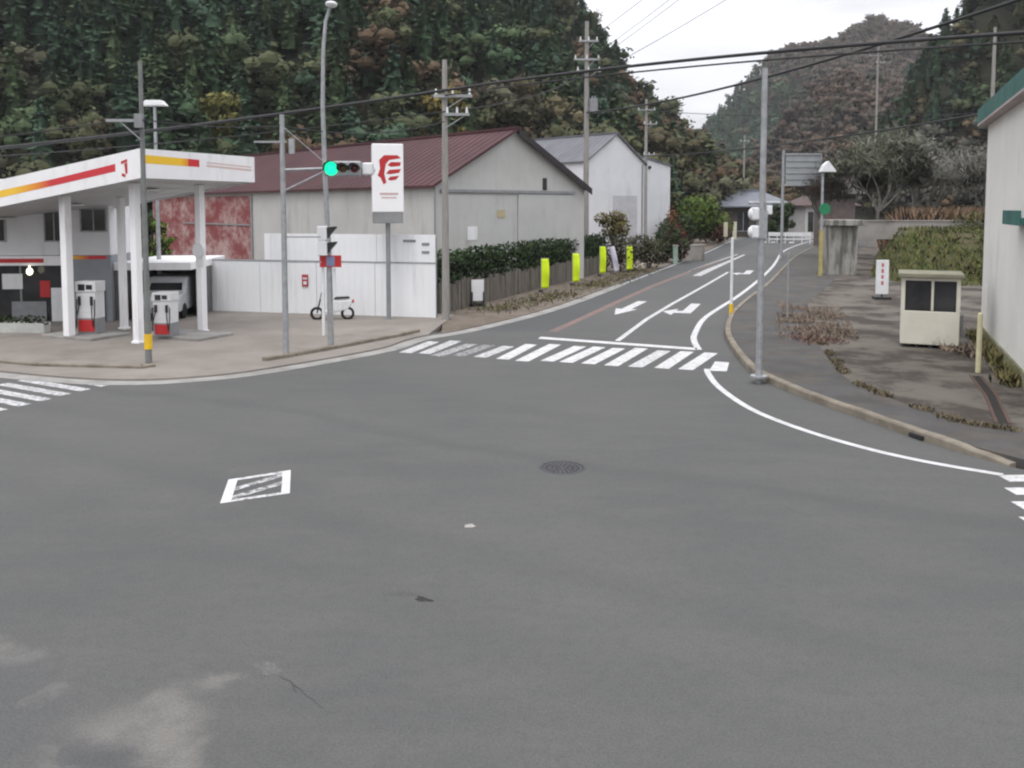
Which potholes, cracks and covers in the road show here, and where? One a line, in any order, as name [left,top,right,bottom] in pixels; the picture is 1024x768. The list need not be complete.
manhole cover [539,460,586,474]
